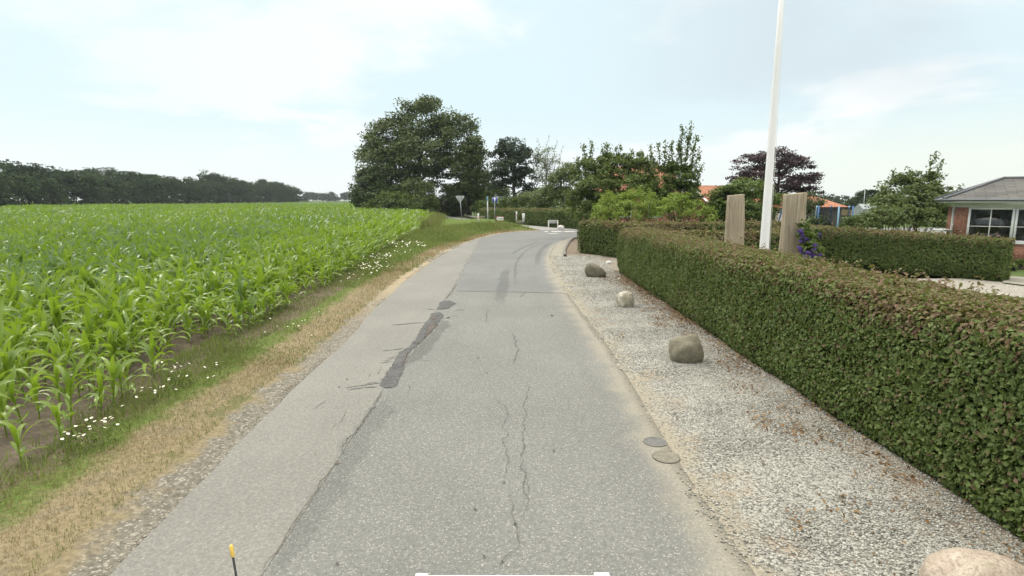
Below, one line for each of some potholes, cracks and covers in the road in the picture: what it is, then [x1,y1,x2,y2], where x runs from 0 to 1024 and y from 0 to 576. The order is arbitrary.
crack [496,380,530,565]
crack [264,372,381,567]
manhole cover [643,437,667,447]
manhole cover [652,451,680,463]
